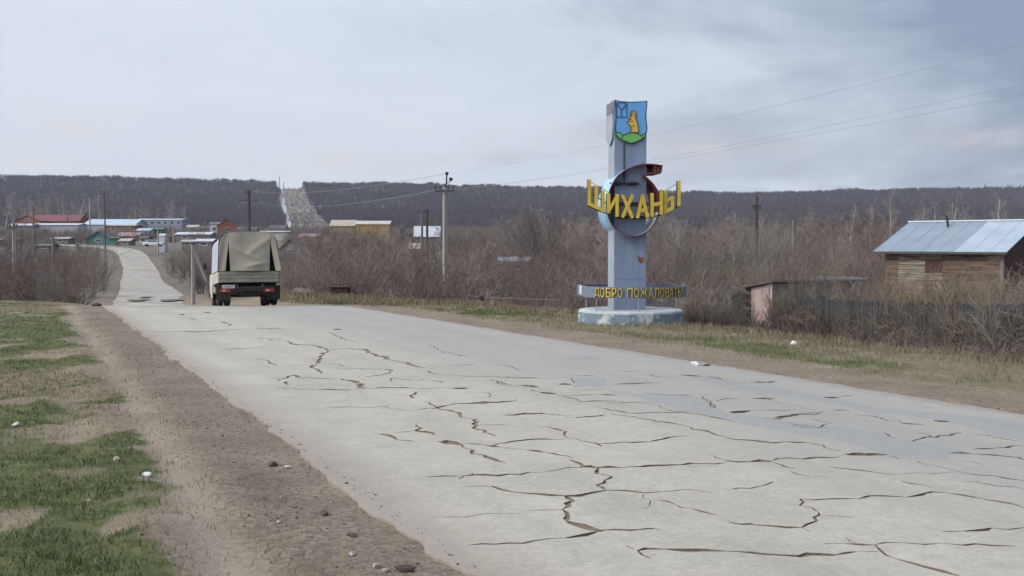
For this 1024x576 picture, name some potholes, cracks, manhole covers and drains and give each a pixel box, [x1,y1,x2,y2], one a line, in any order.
crack [186,318,1024,576]
